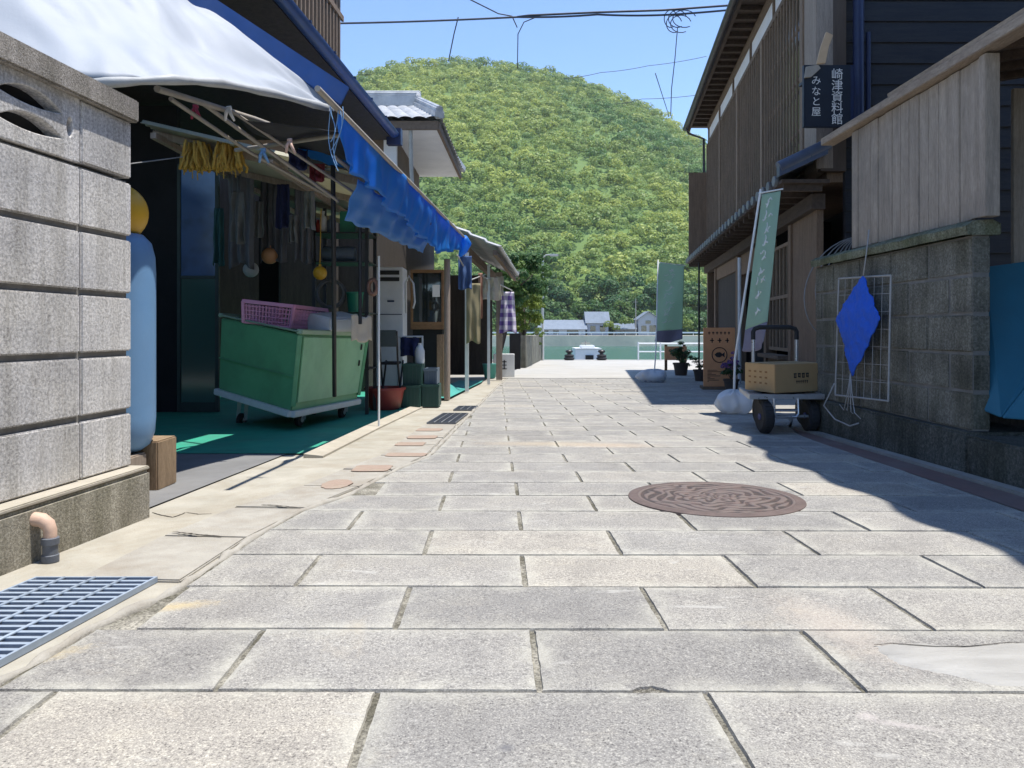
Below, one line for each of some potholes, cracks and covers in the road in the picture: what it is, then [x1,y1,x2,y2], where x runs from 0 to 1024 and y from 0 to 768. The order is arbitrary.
manhole cover [628,482,807,518]
drain grate [427,413,468,424]
crack [152,512,218,536]
drain grate [0,576,158,667]
